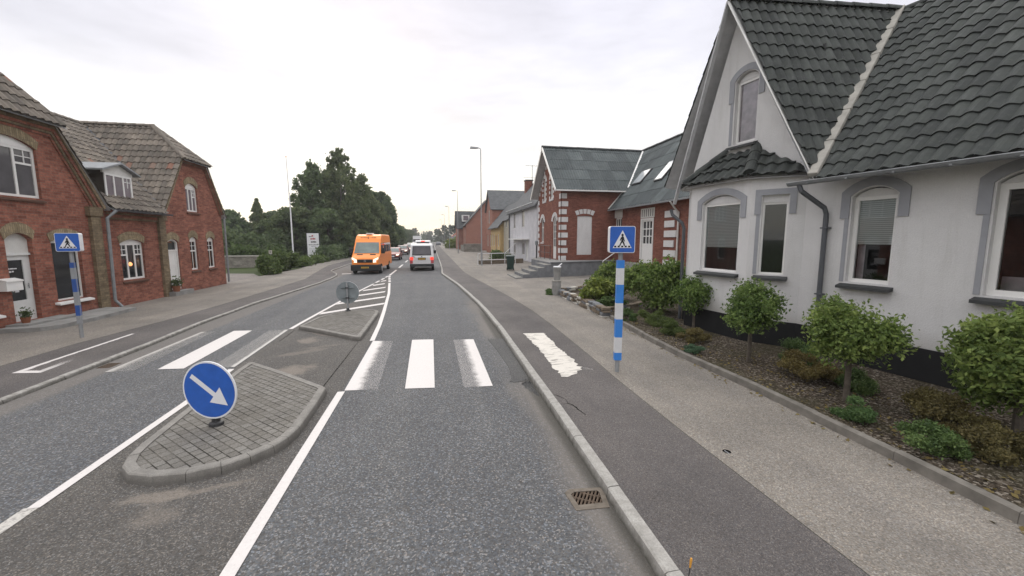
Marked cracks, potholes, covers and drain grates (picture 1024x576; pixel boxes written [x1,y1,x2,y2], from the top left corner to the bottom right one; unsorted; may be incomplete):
drain grate [565,487,610,511]
